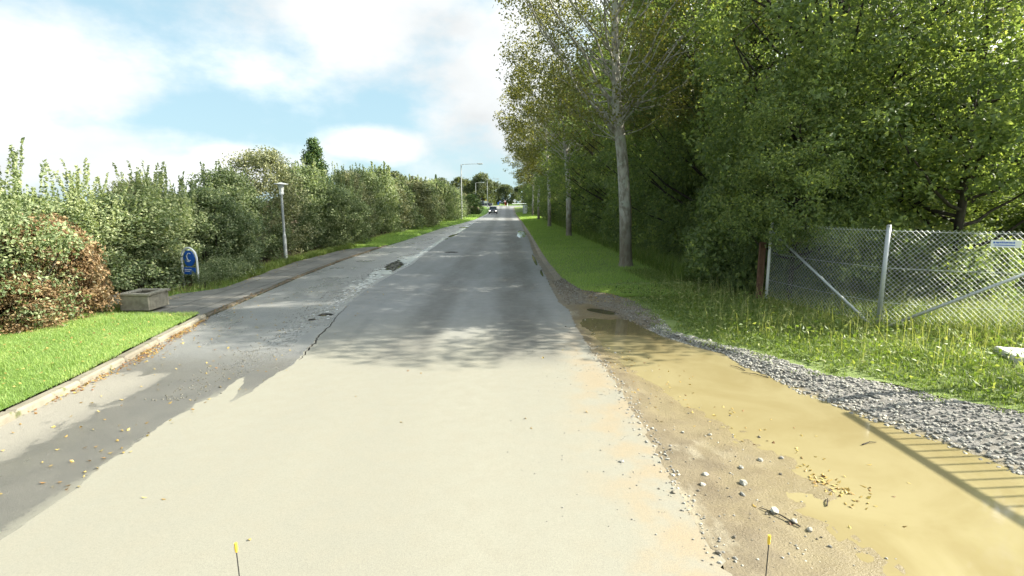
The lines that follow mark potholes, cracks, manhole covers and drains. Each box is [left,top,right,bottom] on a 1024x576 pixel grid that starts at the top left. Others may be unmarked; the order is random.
pothole [384,260,404,271]
crack [299,310,344,360]
